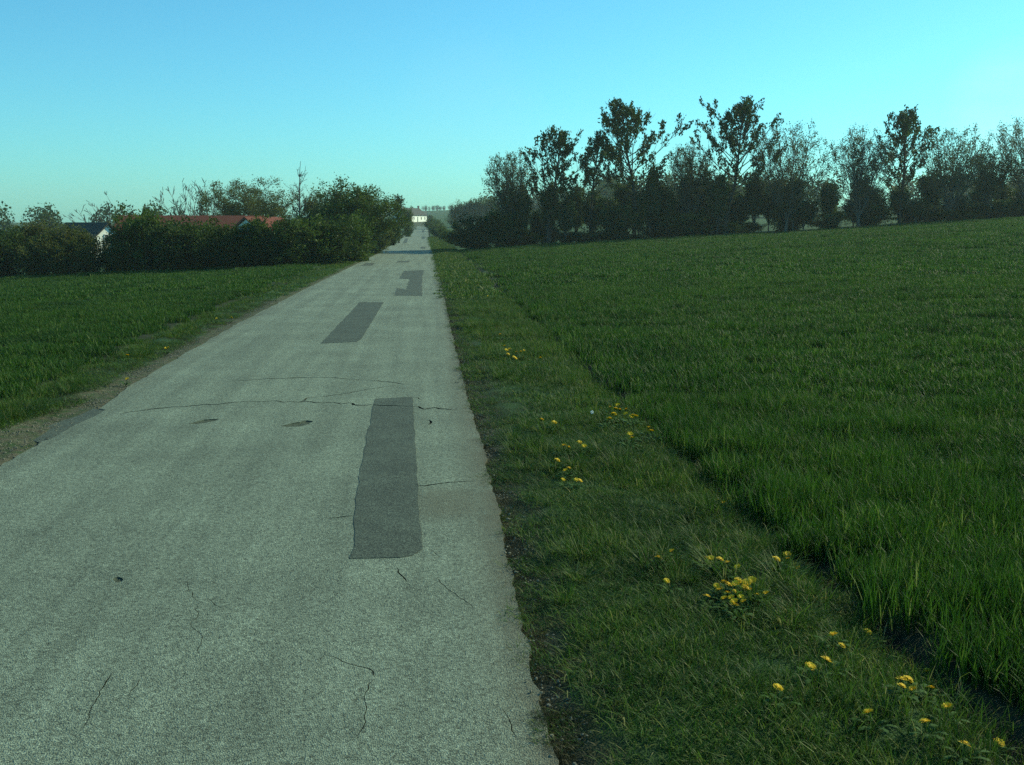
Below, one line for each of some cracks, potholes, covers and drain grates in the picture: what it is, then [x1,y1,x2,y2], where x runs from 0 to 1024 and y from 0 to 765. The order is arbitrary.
crack [187,583,225,656]
crack [320,655,375,738]
crack [120,377,451,425]
